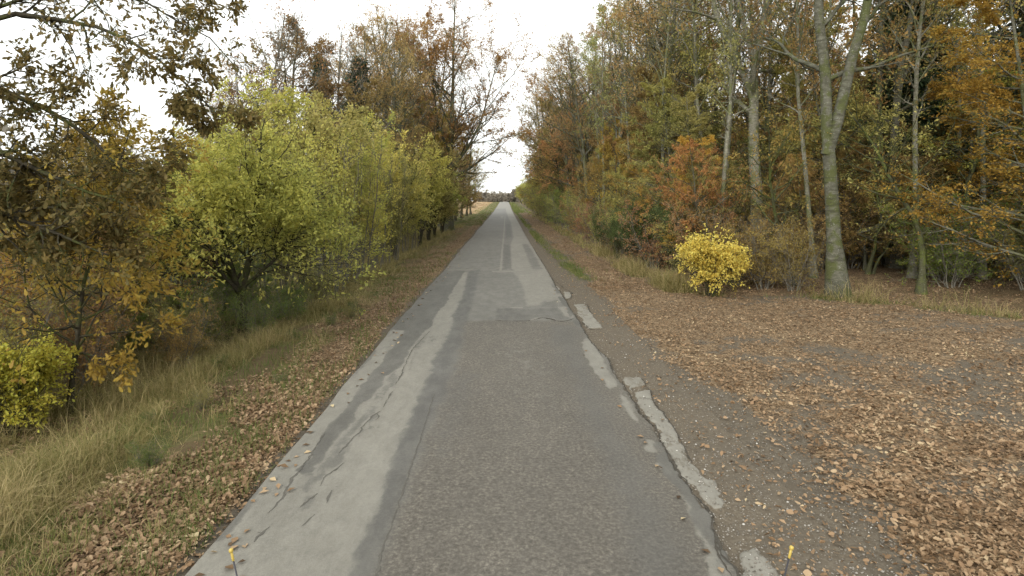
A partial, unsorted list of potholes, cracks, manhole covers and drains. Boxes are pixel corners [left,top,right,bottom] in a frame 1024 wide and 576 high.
crack [254,331,430,542]
